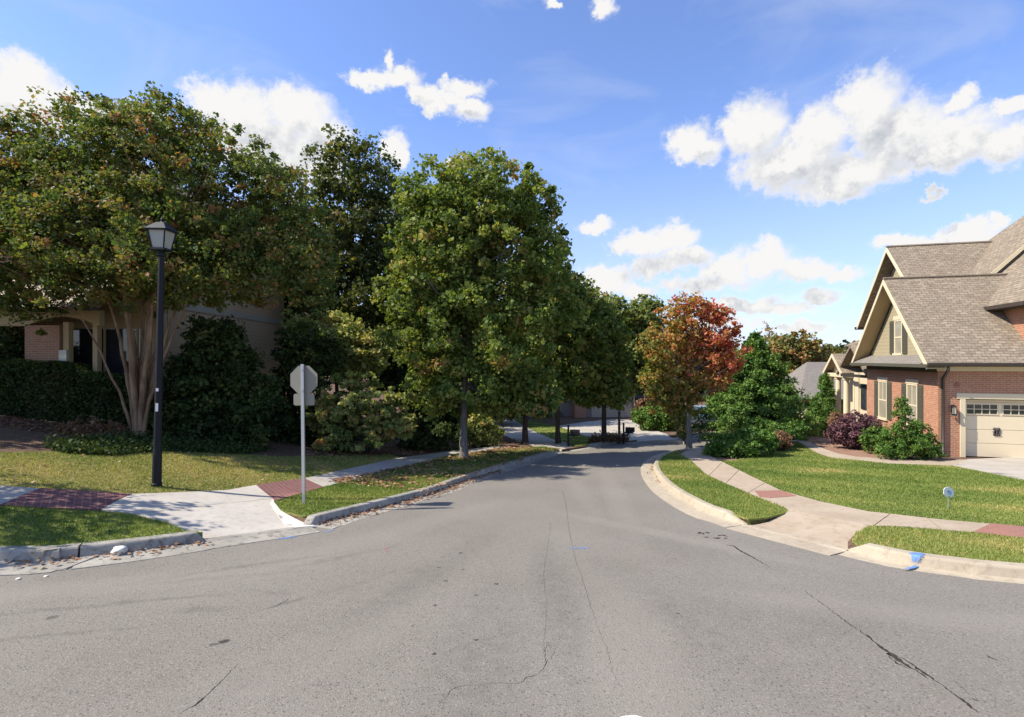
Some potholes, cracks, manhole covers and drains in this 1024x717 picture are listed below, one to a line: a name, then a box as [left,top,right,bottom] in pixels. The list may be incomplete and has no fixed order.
crack [437,523,556,706]
crack [805,591,986,712]
crack [698,532,769,567]
crack [178,667,235,715]
